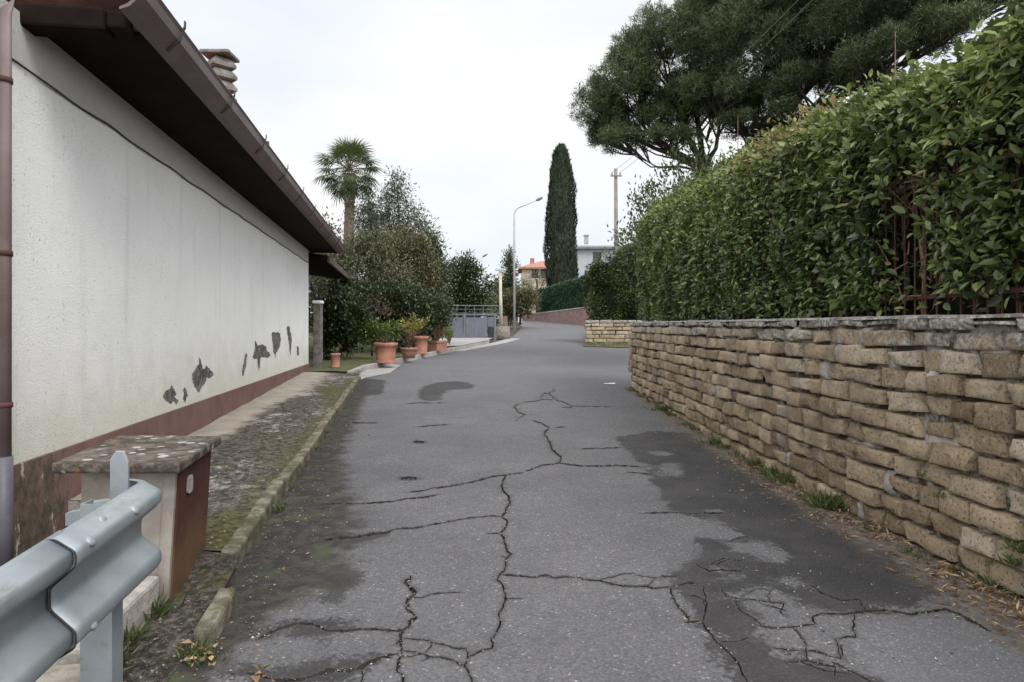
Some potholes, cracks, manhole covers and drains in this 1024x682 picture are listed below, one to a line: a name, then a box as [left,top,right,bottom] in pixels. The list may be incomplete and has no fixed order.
crack [247,391,991,682]
